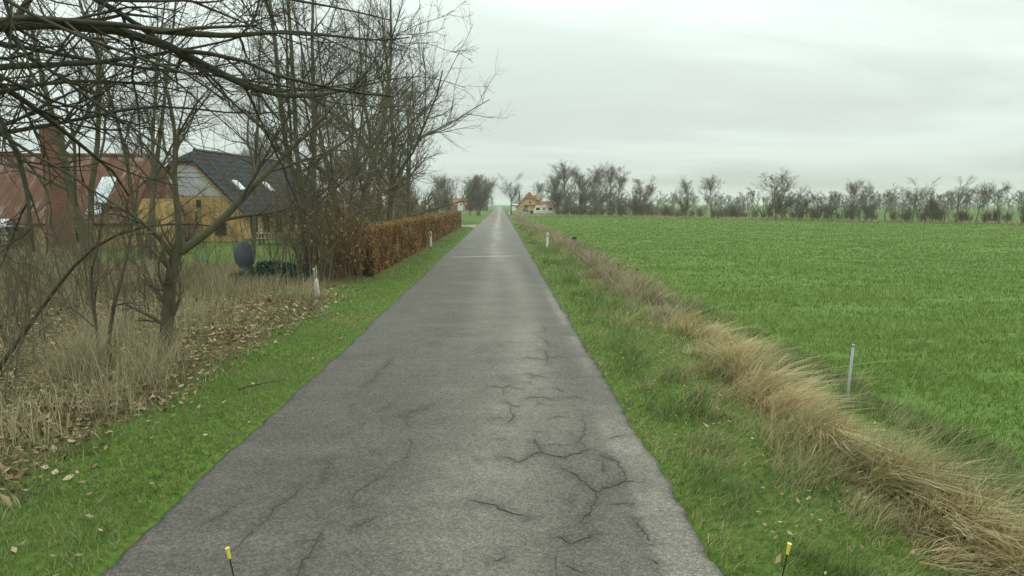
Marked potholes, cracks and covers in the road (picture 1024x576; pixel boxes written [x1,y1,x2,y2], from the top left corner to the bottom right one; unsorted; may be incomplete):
crack [489,328,639,573]
crack [298,533,322,573]
